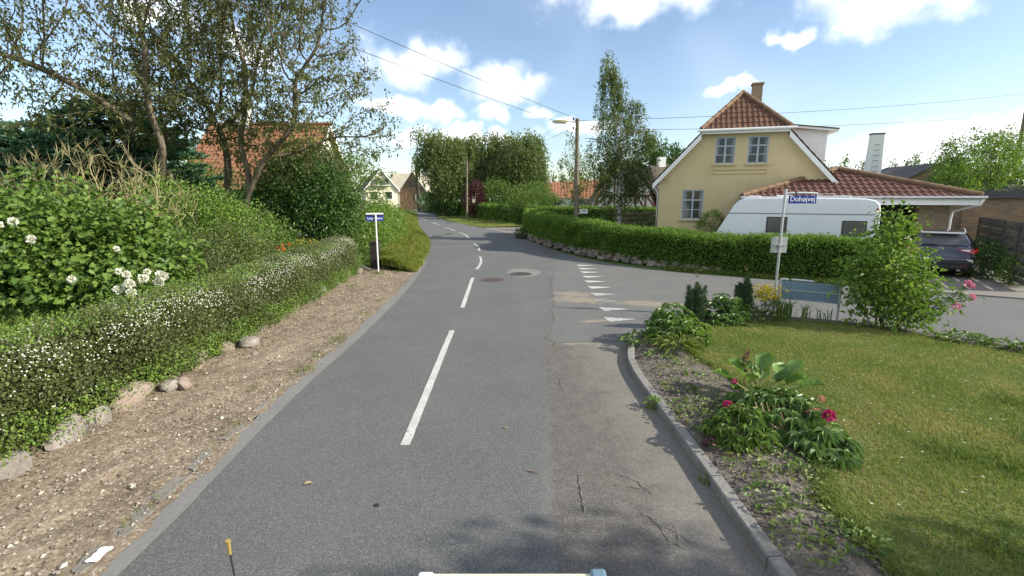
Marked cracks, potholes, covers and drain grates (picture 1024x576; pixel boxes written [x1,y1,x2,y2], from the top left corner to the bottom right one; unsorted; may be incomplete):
crack [641,513,690,550]
crack [569,470,650,513]
manhole cover [507,268,541,277]
